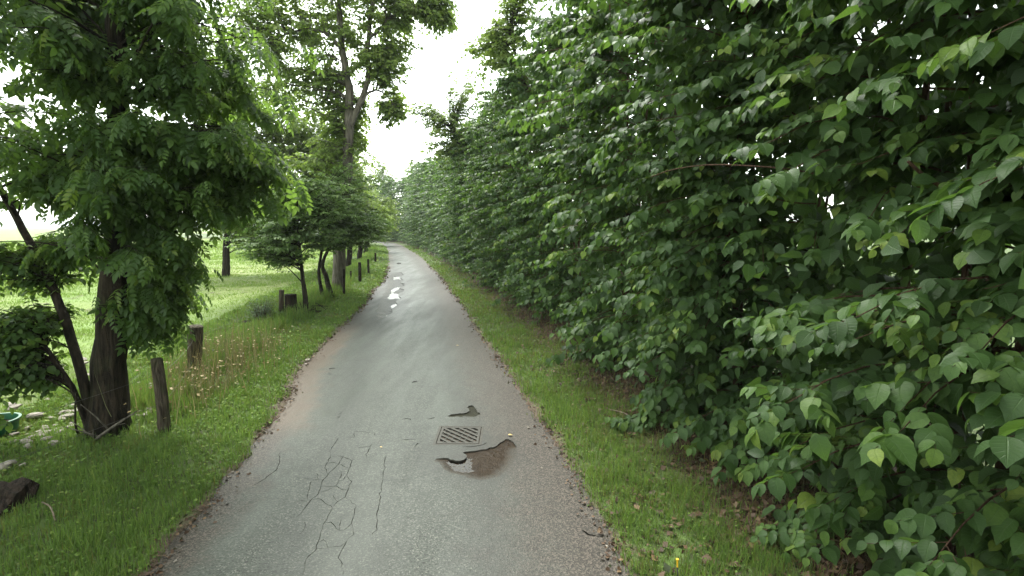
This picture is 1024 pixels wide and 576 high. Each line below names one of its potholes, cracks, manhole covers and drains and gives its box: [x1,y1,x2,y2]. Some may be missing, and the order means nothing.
drain grate [433,426,484,445]
pothole [449,405,480,417]
crack [291,431,385,573]
pothole [434,439,518,480]
